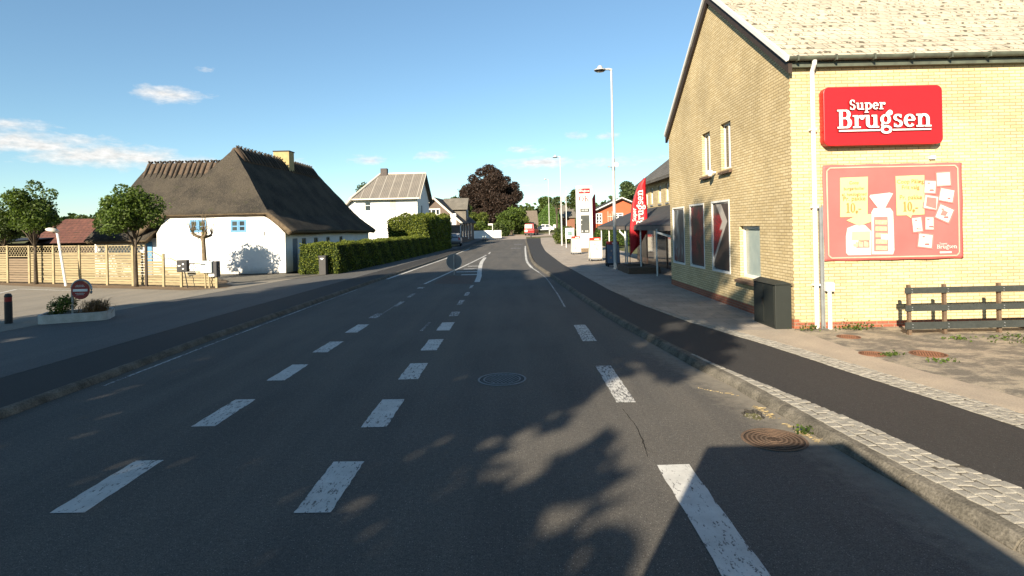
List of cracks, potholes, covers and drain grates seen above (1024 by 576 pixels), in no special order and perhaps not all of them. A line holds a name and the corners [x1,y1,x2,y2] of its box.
manhole cover [741,428,809,452]
manhole cover [478,373,526,386]
manhole cover [908,350,949,358]
